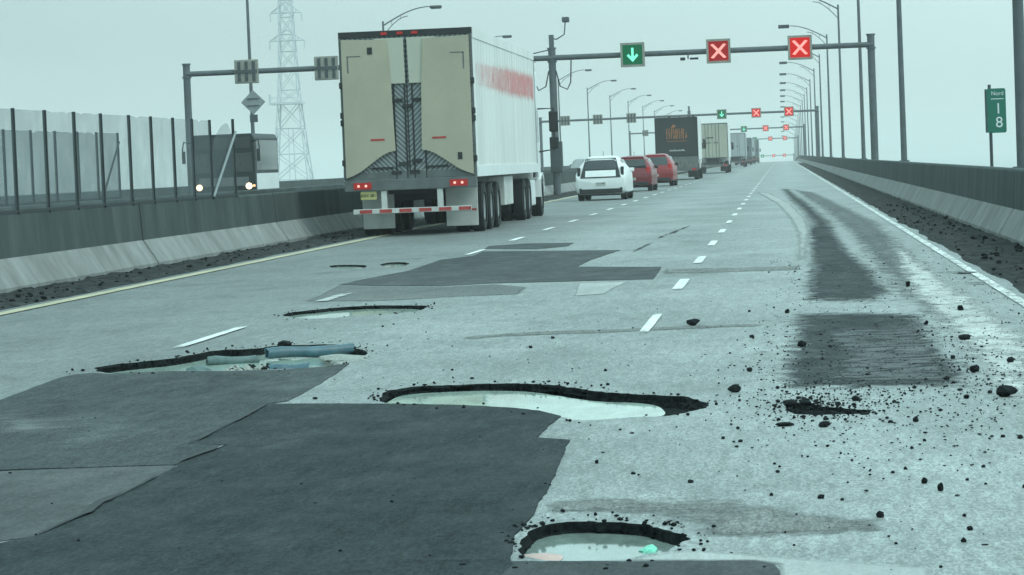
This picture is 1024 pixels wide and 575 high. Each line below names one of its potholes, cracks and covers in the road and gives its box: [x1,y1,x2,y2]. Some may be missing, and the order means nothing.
pothole [283,305,427,319]
pothole [94,344,368,373]
pothole [379,383,709,421]
pothole [518,521,690,561]
pothole [786,404,872,414]
